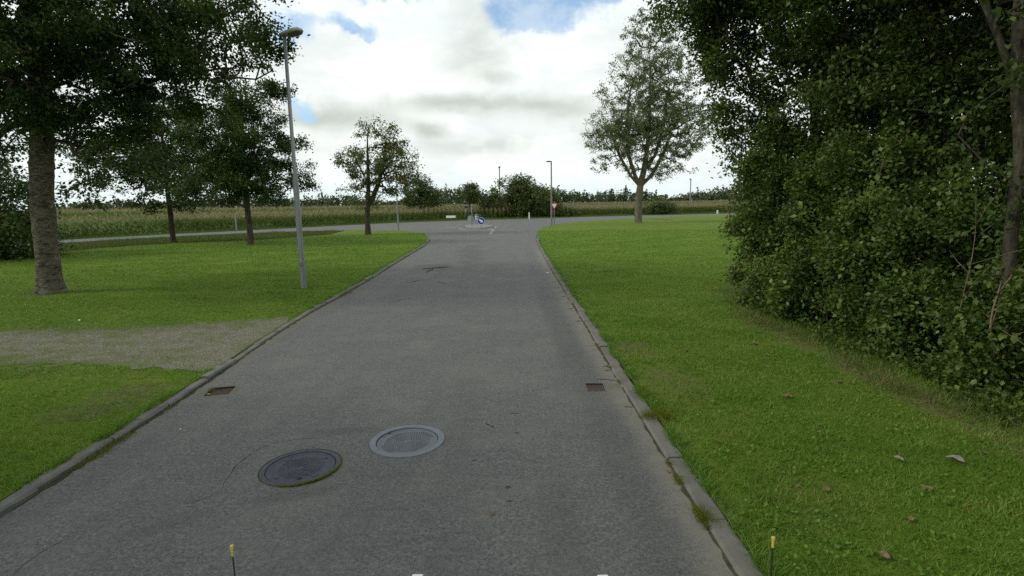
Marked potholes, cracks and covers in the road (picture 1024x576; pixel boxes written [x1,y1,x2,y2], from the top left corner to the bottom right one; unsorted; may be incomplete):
manhole cover [258,449,341,487]
drain grate [204,386,235,396]
drain grate [586,383,605,391]
manhole cover [369,425,445,458]
crack [184,436,326,505]
